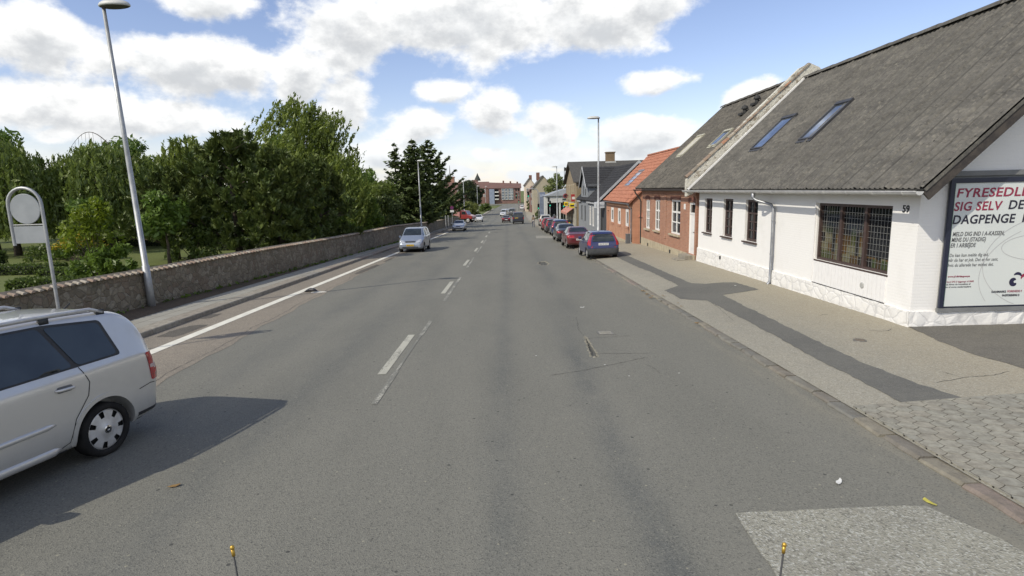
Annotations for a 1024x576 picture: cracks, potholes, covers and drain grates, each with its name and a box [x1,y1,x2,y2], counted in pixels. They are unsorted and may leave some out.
pothole [584,336,599,358]
